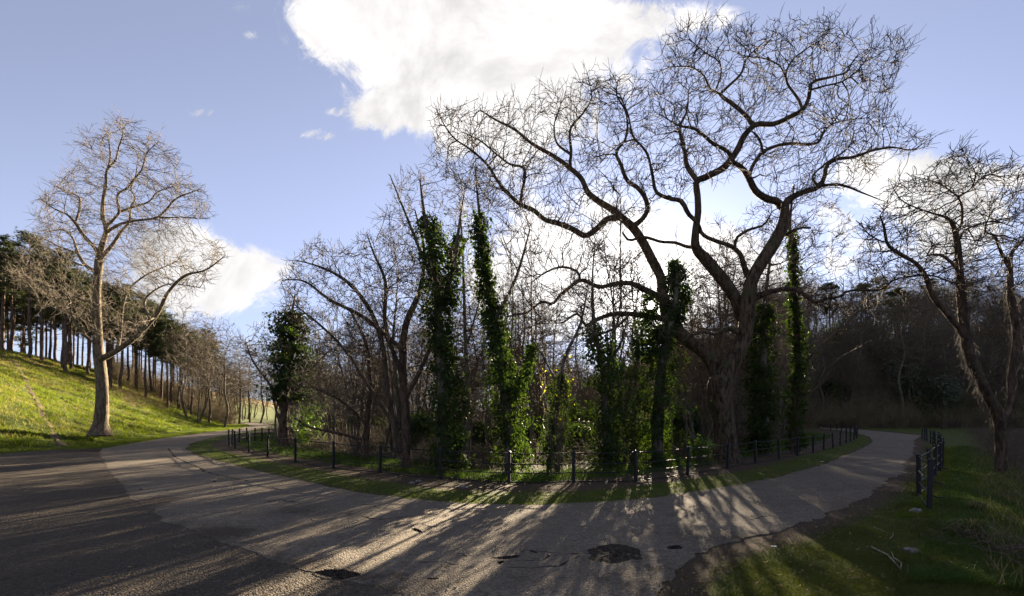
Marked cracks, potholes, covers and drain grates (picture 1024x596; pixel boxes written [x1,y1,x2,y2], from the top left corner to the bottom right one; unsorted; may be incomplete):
crack [167,448,249,481]
pothole [312,569,360,580]
pothole [587,544,643,564]
crack [500,547,583,568]
